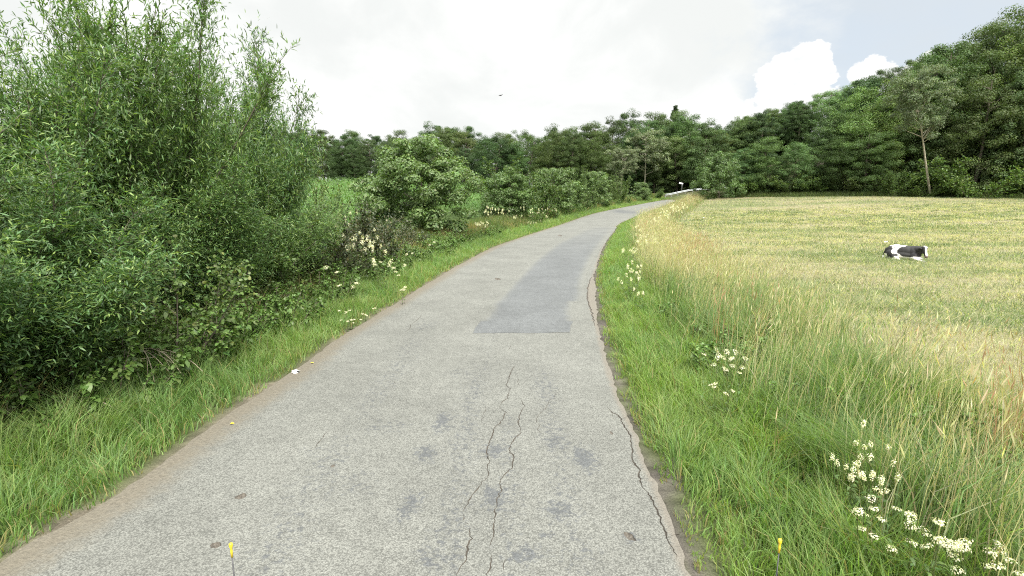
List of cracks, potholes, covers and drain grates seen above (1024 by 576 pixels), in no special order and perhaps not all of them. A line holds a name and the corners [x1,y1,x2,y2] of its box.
crack [608,408,679,555]
crack [586,277,595,326]
crack [456,346,556,575]
